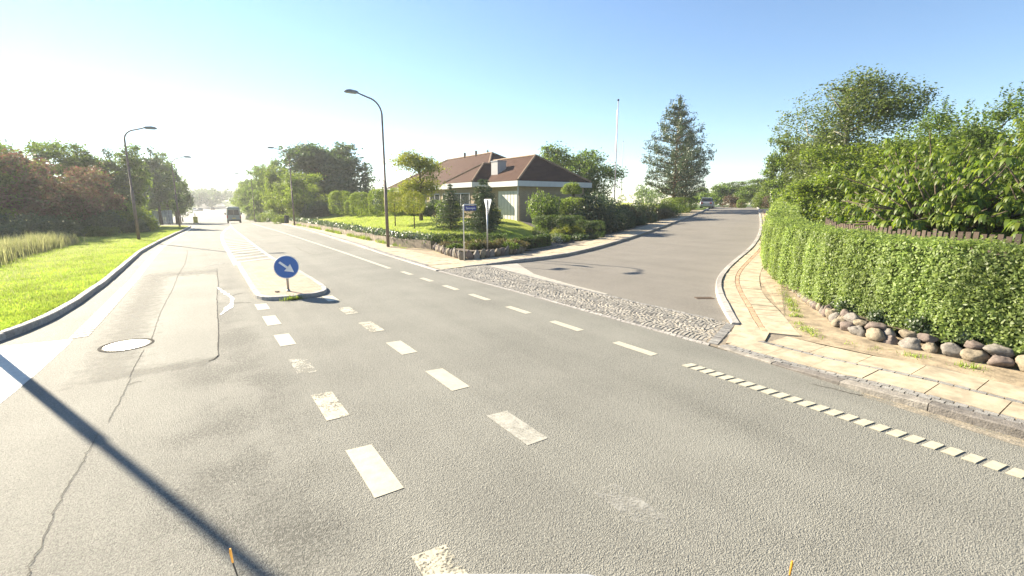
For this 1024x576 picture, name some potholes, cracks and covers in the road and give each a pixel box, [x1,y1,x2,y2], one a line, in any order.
manhole cover [97,338,155,352]
crack [27,251,188,576]
